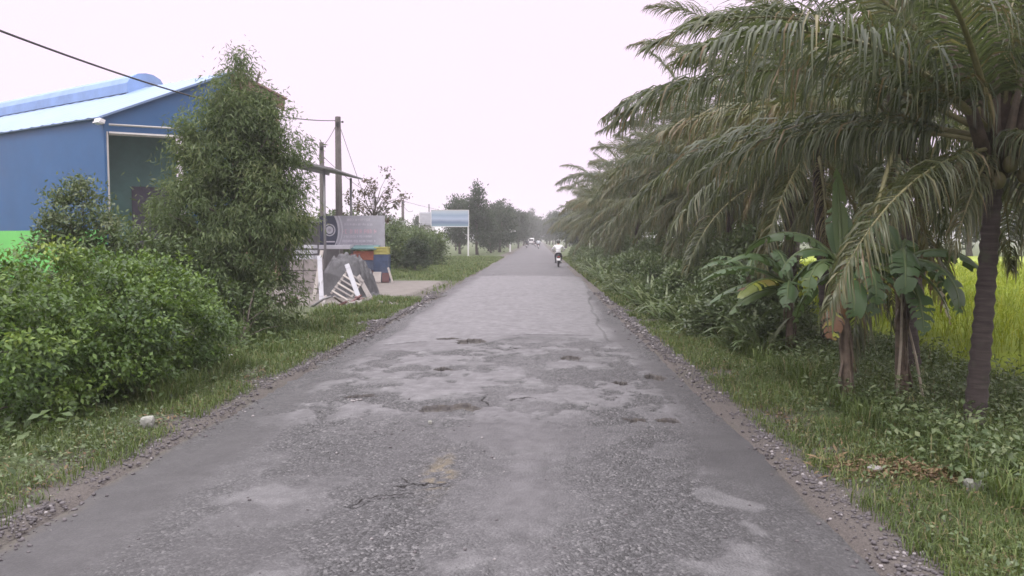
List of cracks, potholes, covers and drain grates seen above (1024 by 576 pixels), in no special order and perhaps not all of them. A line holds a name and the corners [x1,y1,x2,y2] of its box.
pothole [414,402,490,416]
pothole [453,338,490,346]
crack [344,477,449,509]
pothole [646,417,686,425]
pothole [640,373,672,383]
pothole [616,416,654,425]
pothole [429,366,455,374]
